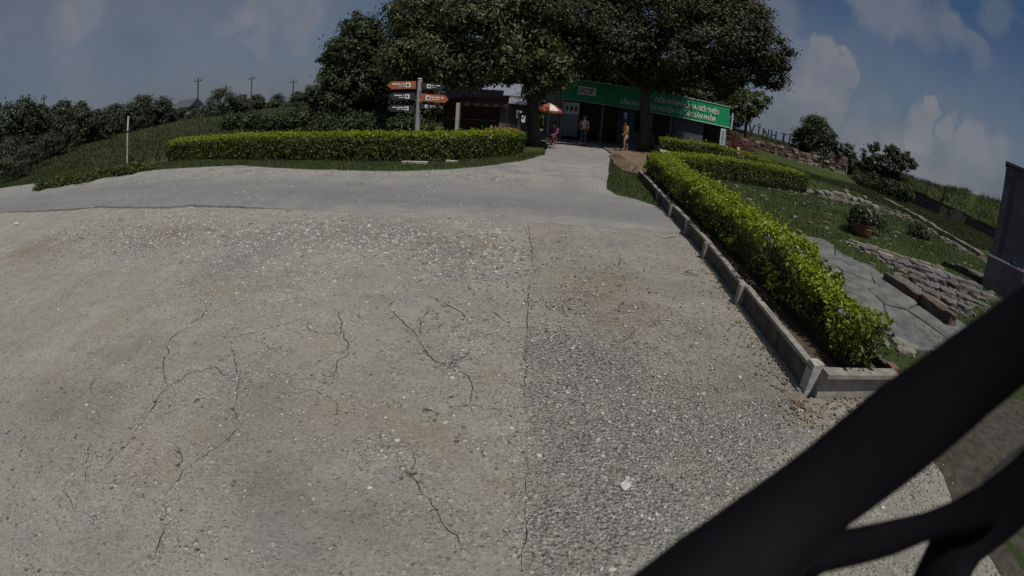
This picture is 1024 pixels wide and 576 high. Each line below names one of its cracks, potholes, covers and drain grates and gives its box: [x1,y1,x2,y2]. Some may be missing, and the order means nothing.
crack [388,295,480,414]
crack [105,304,365,563]
crack [381,453,477,557]
